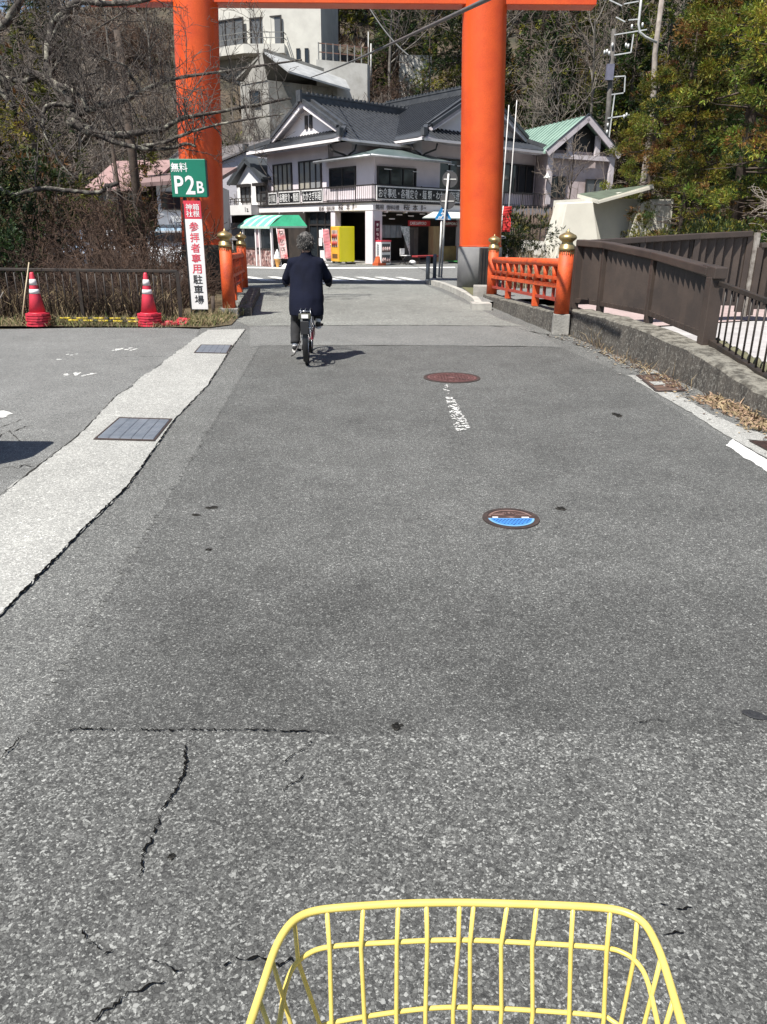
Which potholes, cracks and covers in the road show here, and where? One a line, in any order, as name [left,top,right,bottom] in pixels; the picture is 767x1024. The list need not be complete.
crack [90,958,183,1021]
crack [46,727,328,877]
drain grate [194,344,232,354]
manhole cover [423,372,480,383]
crack [213,955,294,971]
manhole cover [482,508,540,529]
drain grate [94,417,172,441]
